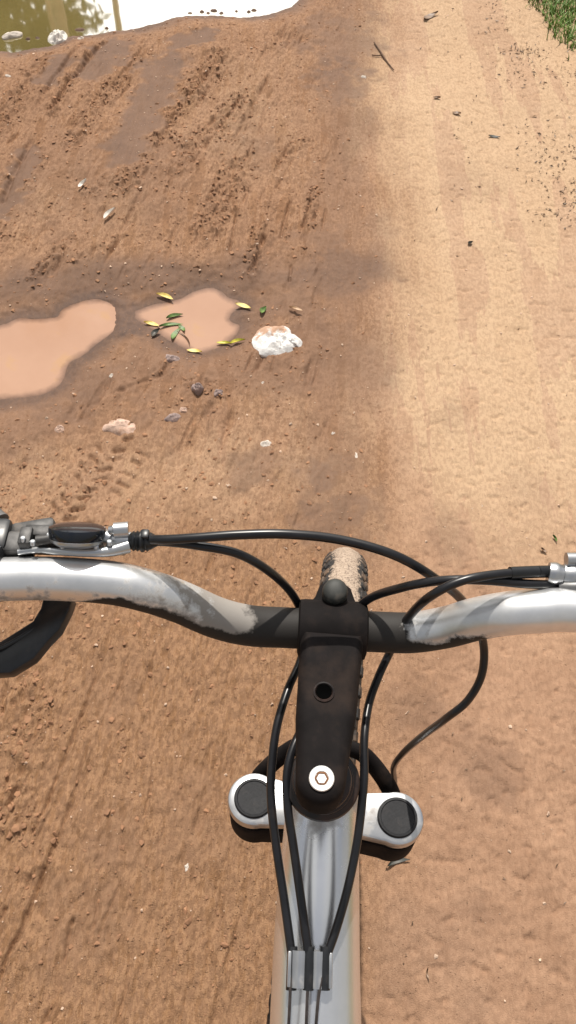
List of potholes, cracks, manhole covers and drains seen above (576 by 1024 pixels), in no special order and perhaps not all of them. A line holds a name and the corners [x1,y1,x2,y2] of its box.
pothole [131,280,249,358]
pothole [0,292,136,407]
